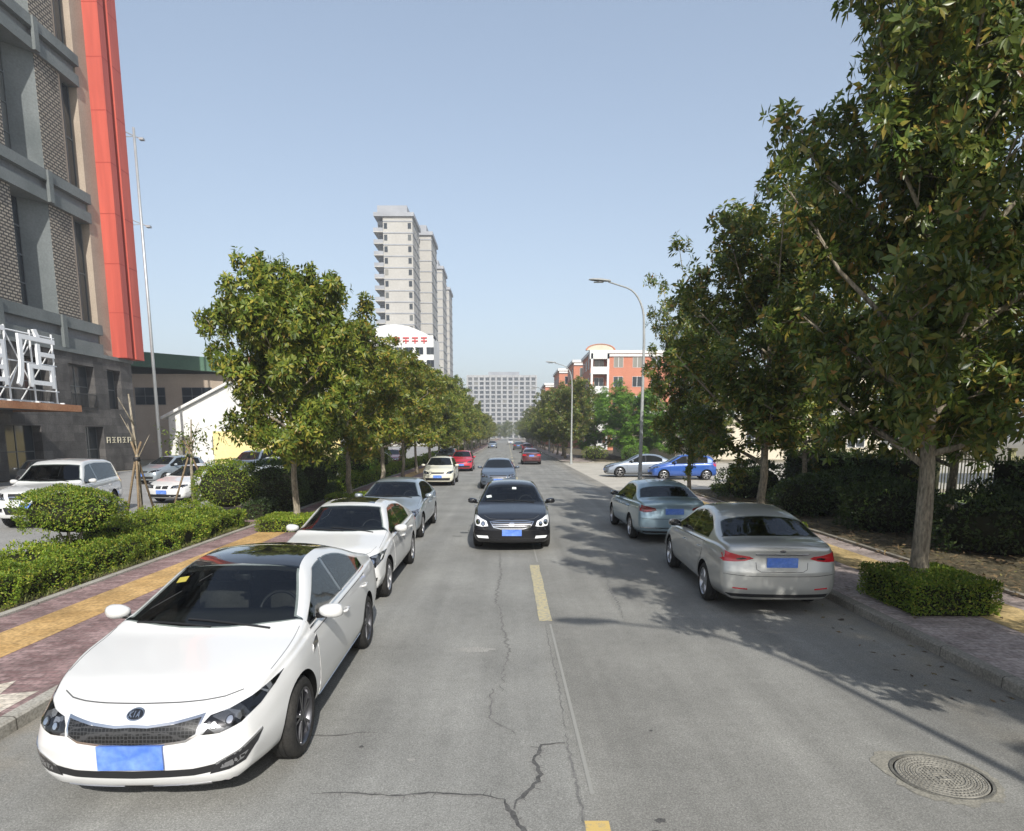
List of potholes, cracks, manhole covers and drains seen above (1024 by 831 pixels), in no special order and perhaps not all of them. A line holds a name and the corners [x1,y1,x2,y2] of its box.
crack [312,555,565,831]
manhole cover [870,750,1007,807]
